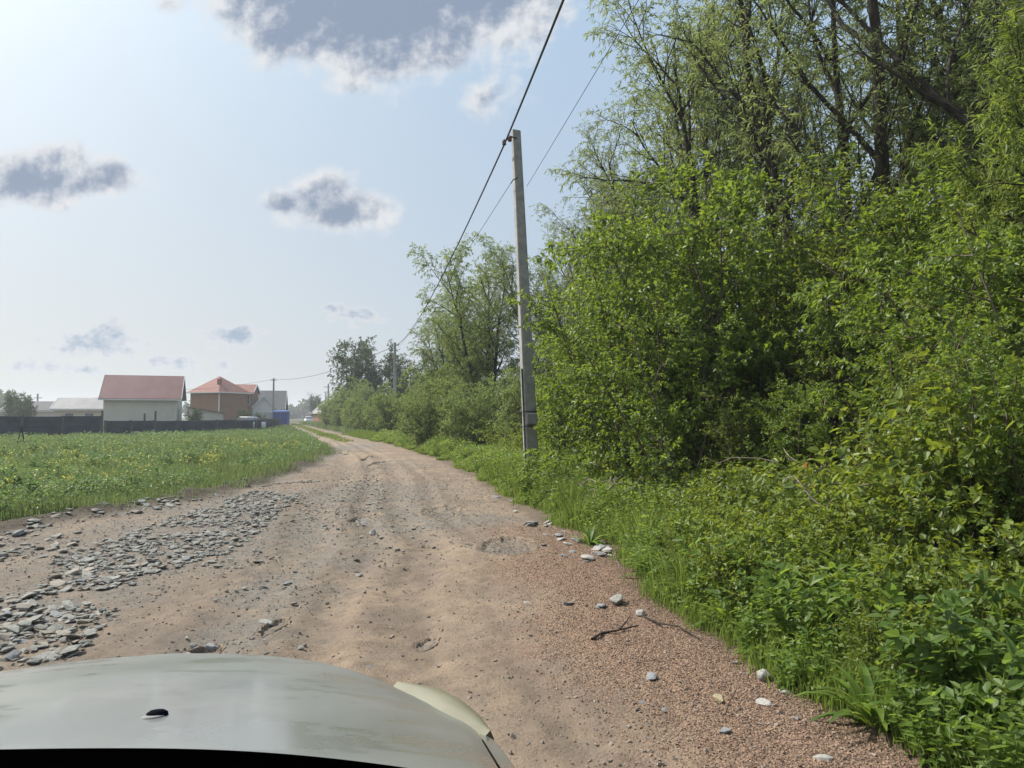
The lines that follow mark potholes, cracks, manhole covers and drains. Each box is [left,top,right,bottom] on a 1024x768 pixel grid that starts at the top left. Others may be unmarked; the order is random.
pothole [414,637,440,652]
pothole [474,534,539,556]
